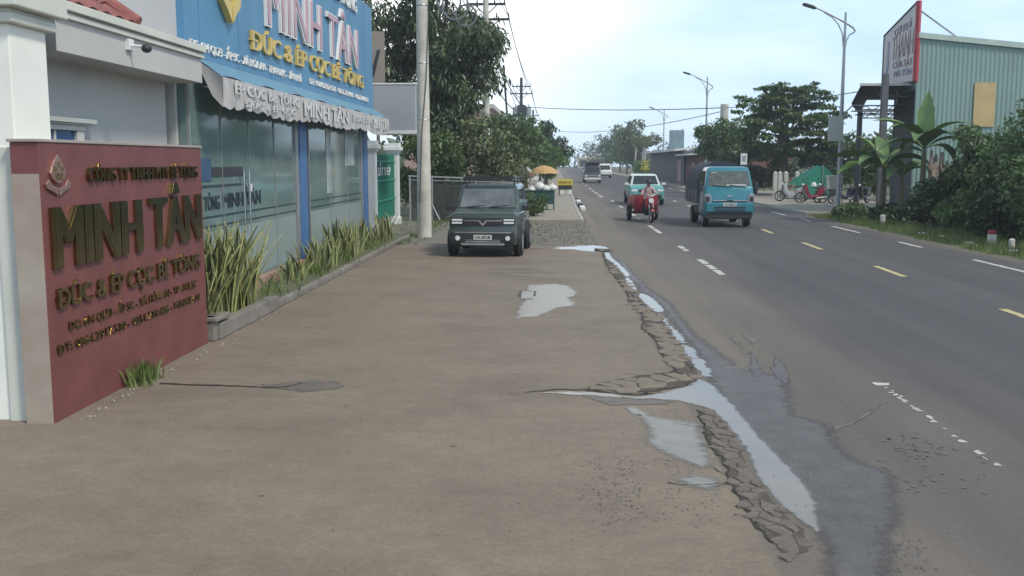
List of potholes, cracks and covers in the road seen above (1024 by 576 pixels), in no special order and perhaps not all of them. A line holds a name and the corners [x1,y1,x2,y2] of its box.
crack [529,252,703,395]
pothole [698,409,812,562]
crack [669,409,777,542]
